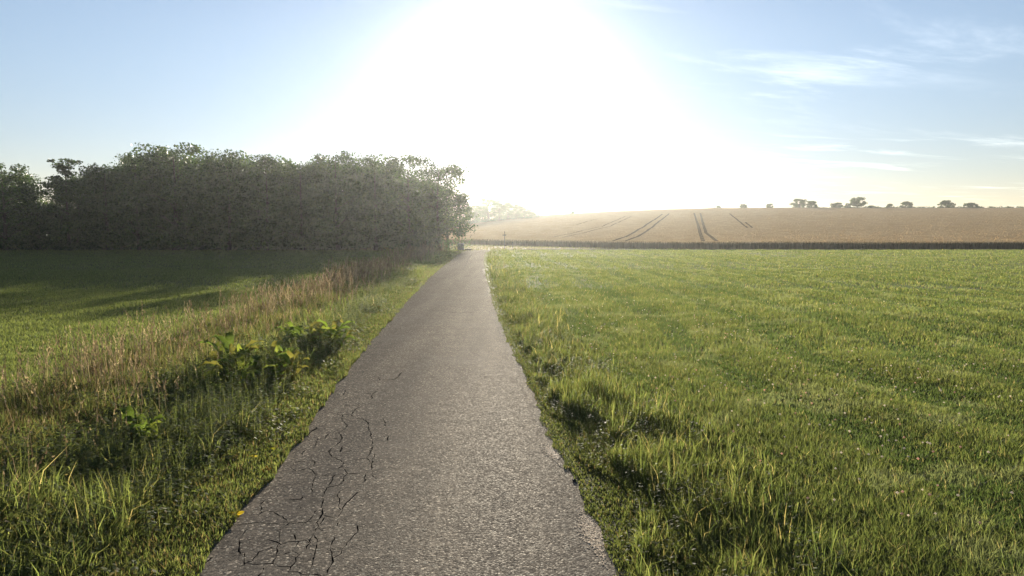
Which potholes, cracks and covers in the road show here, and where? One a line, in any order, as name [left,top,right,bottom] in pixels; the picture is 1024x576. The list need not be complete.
crack [237,372,402,576]
